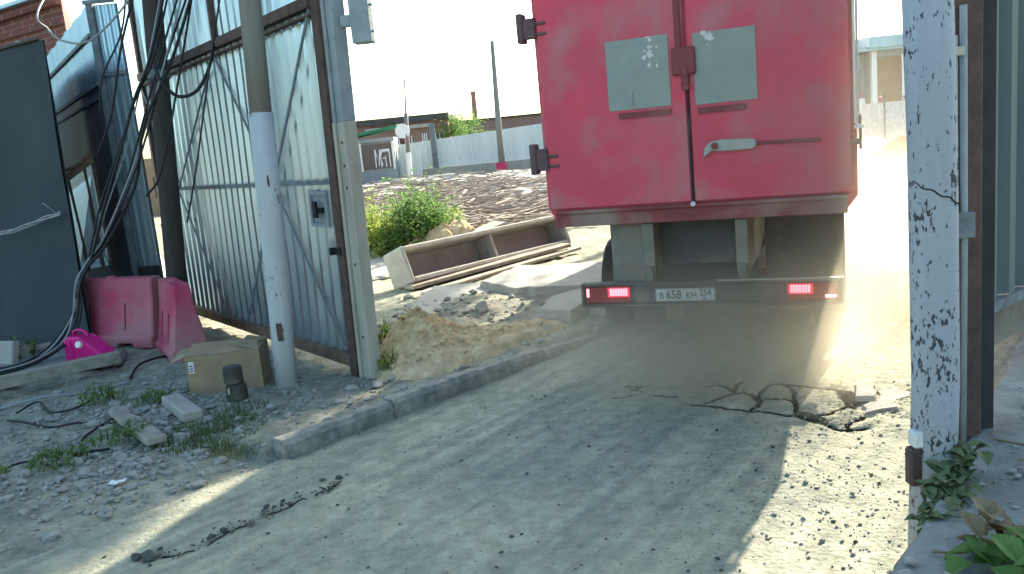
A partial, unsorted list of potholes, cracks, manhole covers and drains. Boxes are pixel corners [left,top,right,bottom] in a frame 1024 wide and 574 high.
crack [161,481,342,558]
pothole [792,411,827,425]
crack [613,381,869,433]
